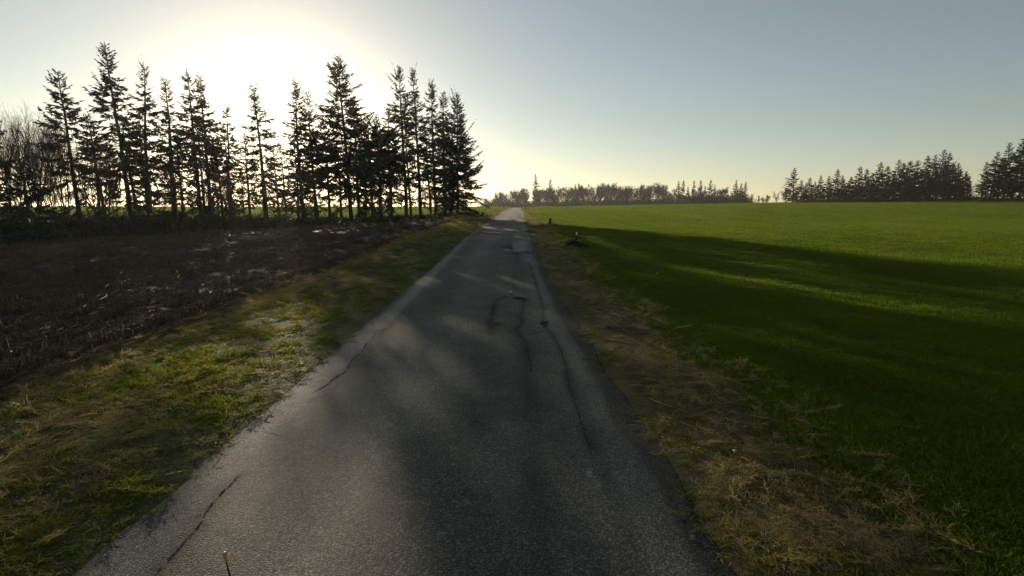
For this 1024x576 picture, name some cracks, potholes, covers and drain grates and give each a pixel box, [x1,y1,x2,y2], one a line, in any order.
crack [154,454,238,575]
crack [489,252,591,451]
